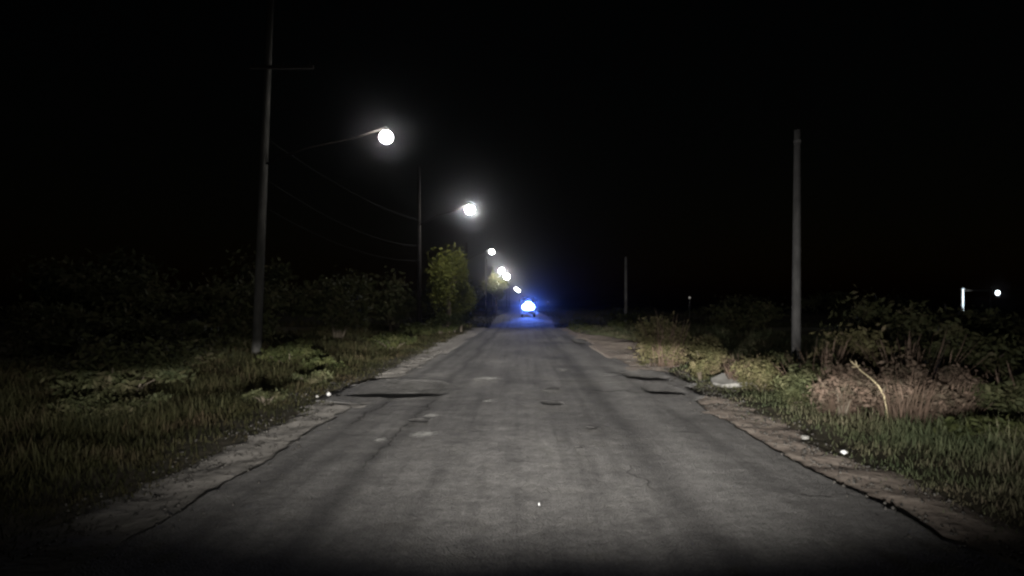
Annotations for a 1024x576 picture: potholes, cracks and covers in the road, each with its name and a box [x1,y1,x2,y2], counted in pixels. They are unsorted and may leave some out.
pothole [616,370,674,381]
pothole [637,383,690,396]
pothole [339,379,465,399]
